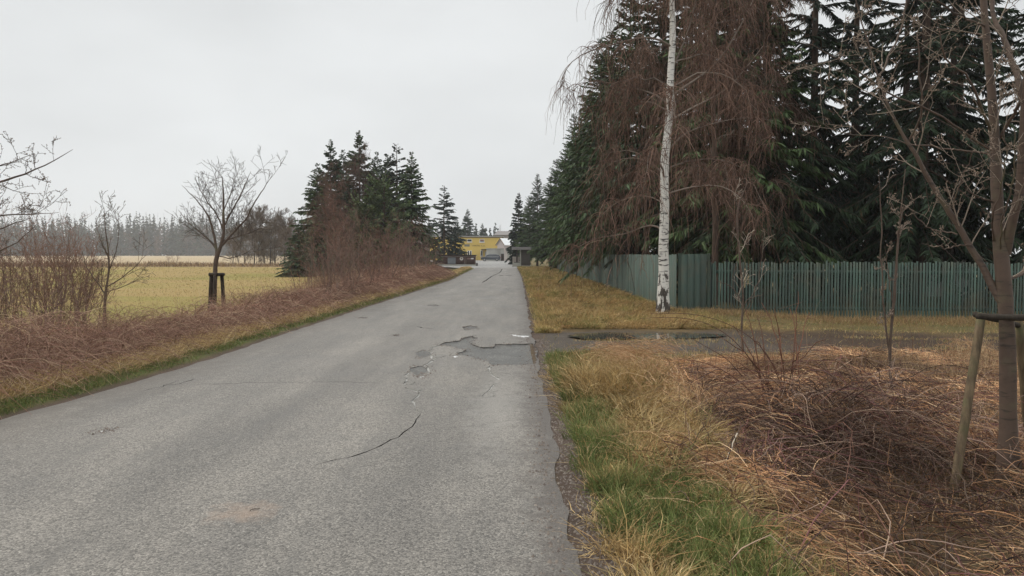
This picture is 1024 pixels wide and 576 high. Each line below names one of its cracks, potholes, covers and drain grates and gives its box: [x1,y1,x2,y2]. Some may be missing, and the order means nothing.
pothole [410,366,427,375]
crack [320,345,444,464]
crack [469,366,499,399]
